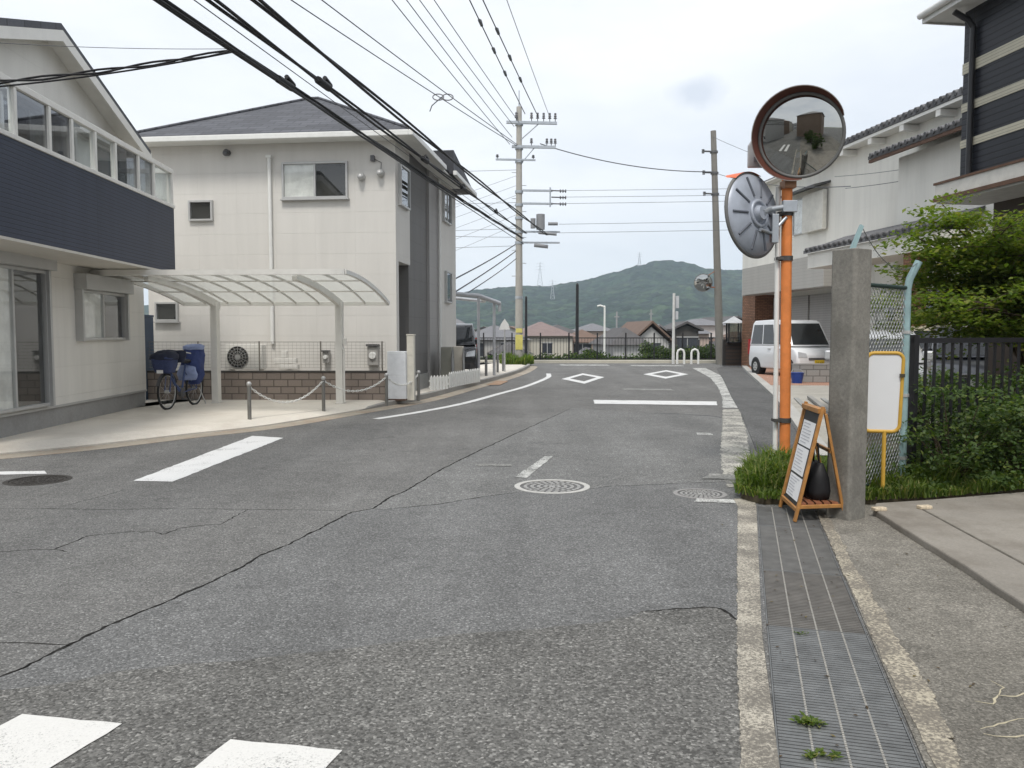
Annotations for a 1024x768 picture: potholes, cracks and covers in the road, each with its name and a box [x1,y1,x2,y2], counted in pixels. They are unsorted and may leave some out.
drain grate [767,626,923,768]
drain grate [757,506,823,529]
manhole cover [2,475,73,486]
manhole cover [673,488,727,499]
drain grate [759,525,842,575]
manhole cover [514,479,590,494]
crack [641,606,737,620]
crack [0,408,571,677]
drain grate [762,569,867,635]
